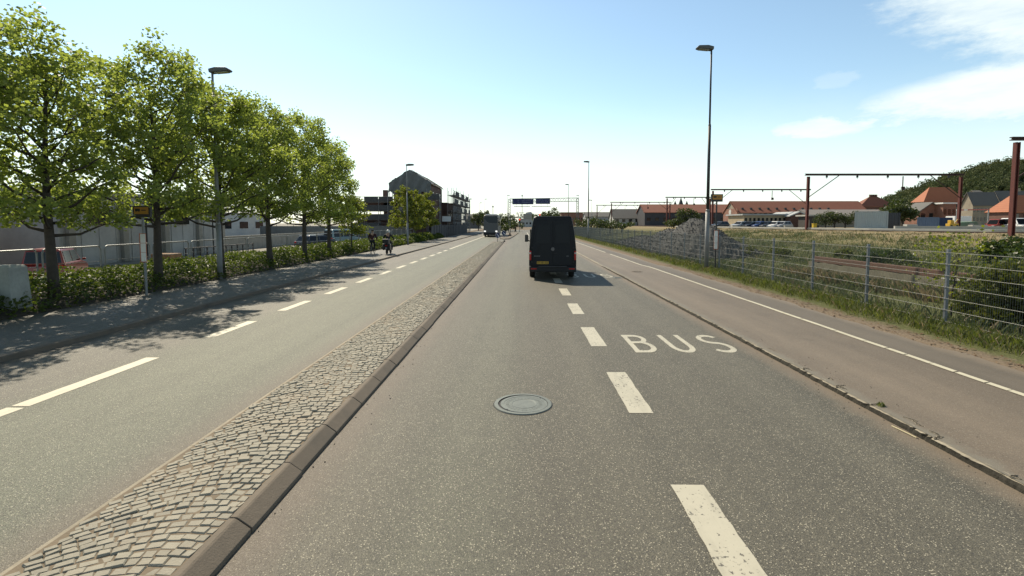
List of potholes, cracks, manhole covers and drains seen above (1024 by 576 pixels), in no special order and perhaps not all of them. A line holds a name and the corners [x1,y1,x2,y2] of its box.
manhole cover [493,394,553,416]
crack [904,417,943,440]
